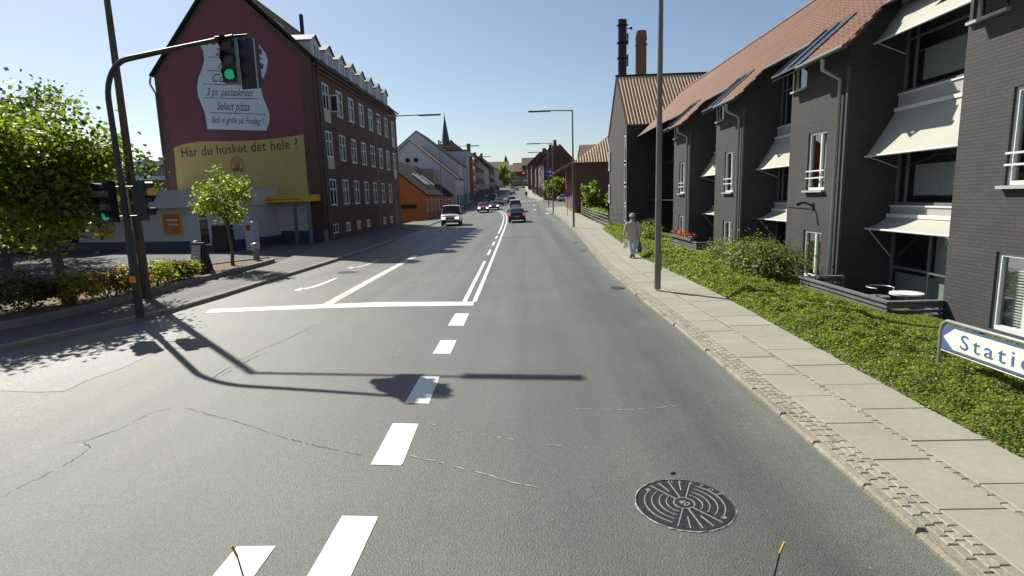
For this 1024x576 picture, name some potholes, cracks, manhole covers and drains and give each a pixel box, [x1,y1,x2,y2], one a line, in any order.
crack [410,455,538,488]
manhole cover [635,479,737,533]
